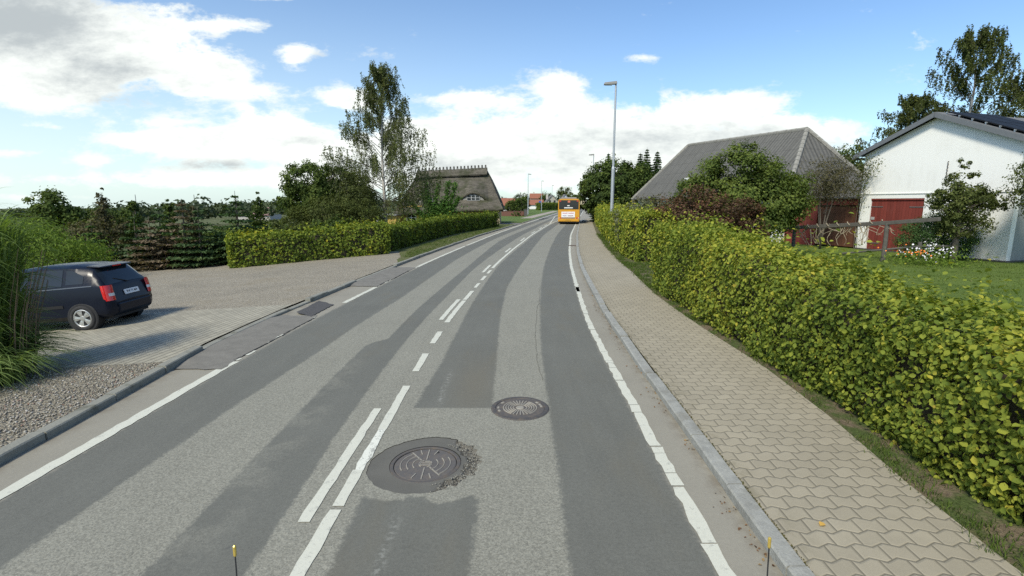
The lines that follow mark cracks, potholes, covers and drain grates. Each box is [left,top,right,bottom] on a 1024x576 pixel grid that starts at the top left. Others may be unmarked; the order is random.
pothole [430,440,484,493]
manhole cover [491,397,549,421]
manhole cover [389,447,461,483]
